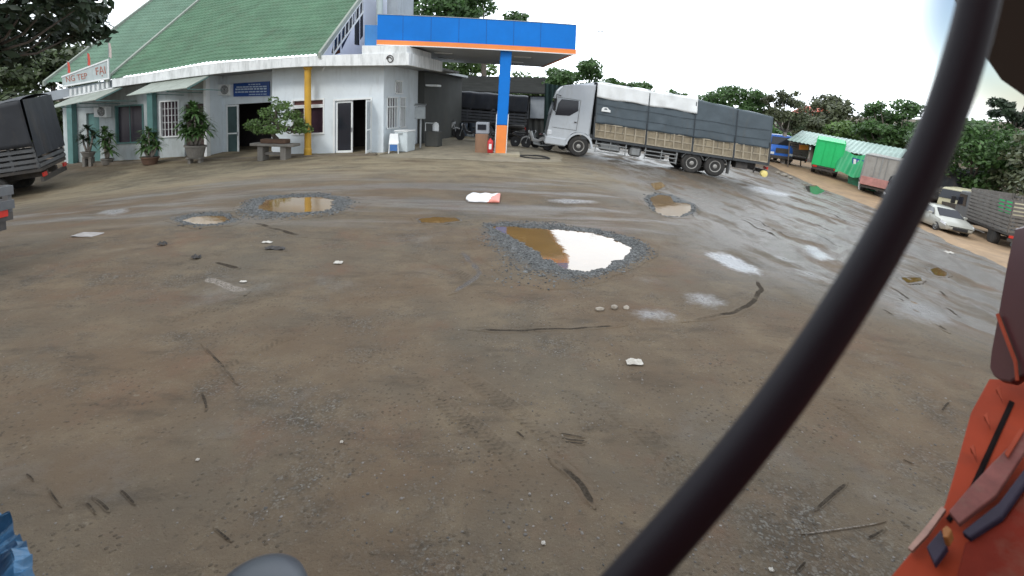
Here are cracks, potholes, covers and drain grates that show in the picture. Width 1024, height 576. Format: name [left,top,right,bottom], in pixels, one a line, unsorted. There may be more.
pothole [465,220,659,291]
pothole [925,266,952,278]
pothole [410,214,468,225]
pothole [163,210,244,229]
pothole [637,192,703,219]
pothole [897,276,926,285]
pothole [226,192,373,224]
crack [468,325,629,334]
crack [200,343,239,411]
